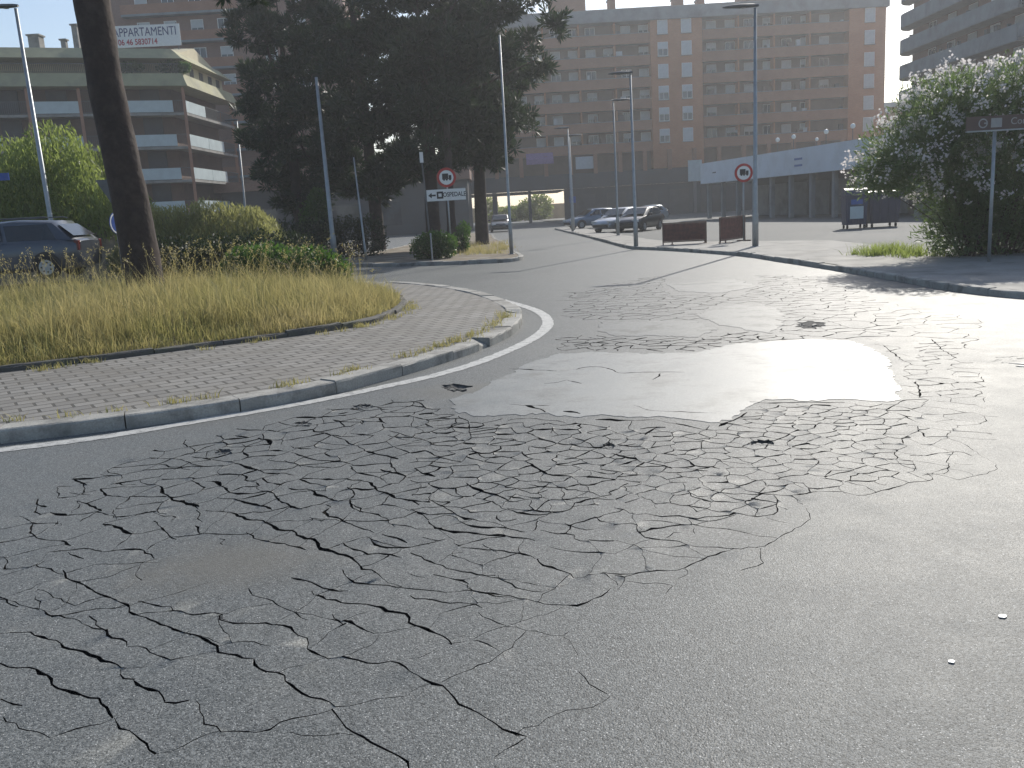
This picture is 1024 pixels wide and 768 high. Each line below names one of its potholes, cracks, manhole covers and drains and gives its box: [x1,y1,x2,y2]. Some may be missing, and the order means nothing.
pothole [442,383,473,392]
crack [0,338,998,768]
pothole [749,439,775,447]
crack [555,276,982,360]
pothole [795,321,826,329]
